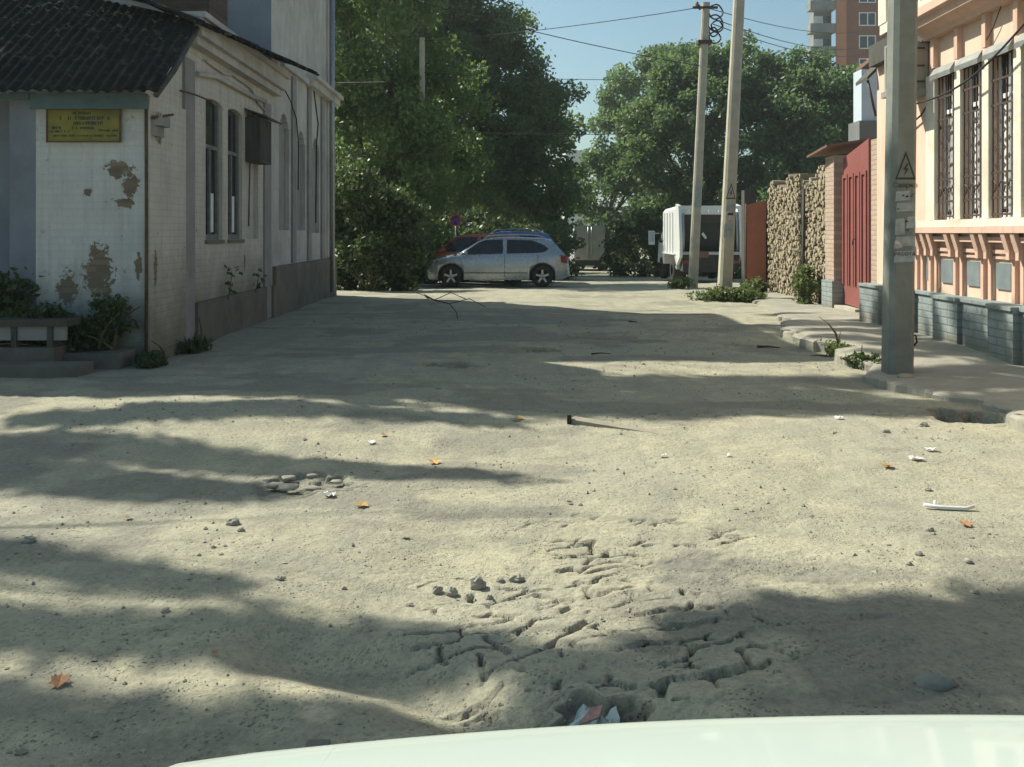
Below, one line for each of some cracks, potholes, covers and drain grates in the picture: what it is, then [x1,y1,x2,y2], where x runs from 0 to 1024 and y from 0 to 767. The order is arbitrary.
pothole [539,682,667,728]
pothole [237,470,370,501]
pothole [410,360,488,370]
pothole [916,406,1009,427]
crack [351,502,1024,740]
